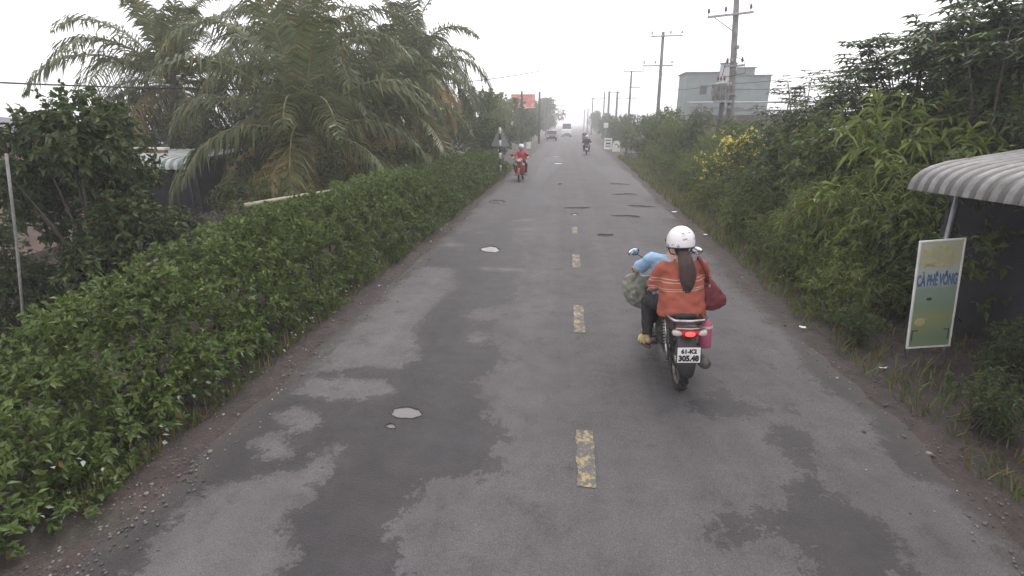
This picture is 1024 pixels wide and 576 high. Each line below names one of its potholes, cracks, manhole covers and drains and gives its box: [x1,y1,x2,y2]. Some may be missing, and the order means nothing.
pothole [390,406,425,419]
pothole [479,245,501,253]
